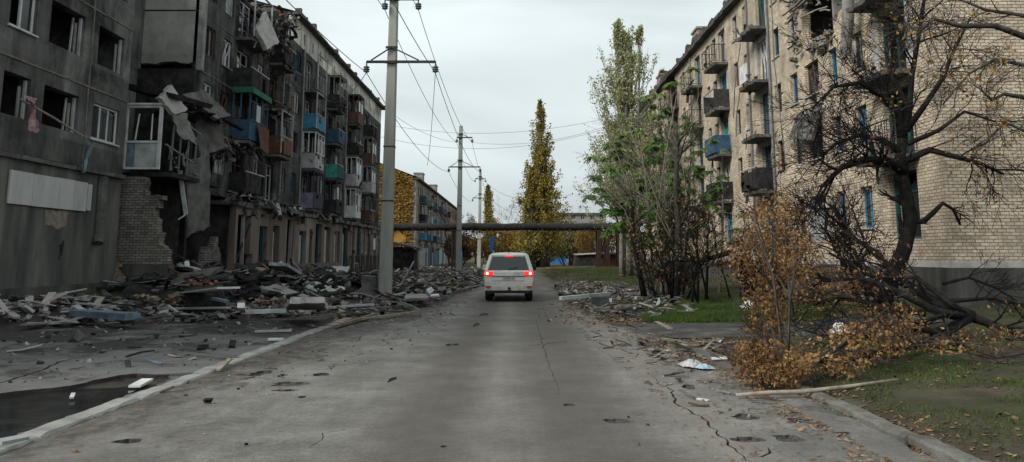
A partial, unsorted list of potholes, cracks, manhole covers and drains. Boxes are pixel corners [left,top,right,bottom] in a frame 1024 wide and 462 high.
pothole [0,373,171,398]
crack [0,356,84,383]
crack [651,375,772,462]
crack [527,320,571,393]
